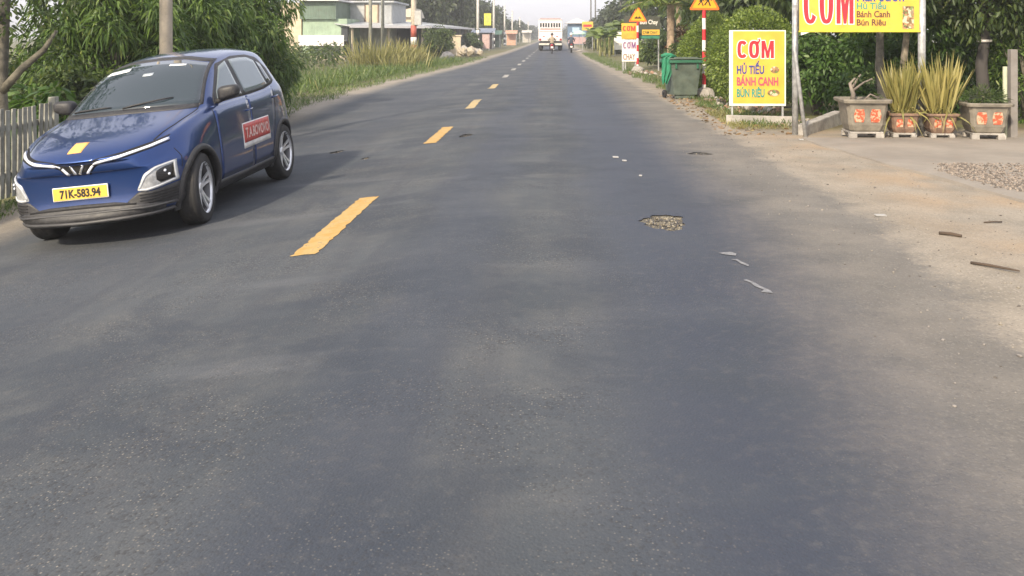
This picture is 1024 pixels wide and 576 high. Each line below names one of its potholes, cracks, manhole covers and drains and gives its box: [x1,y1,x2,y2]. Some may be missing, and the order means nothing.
pothole [639,215,685,231]
